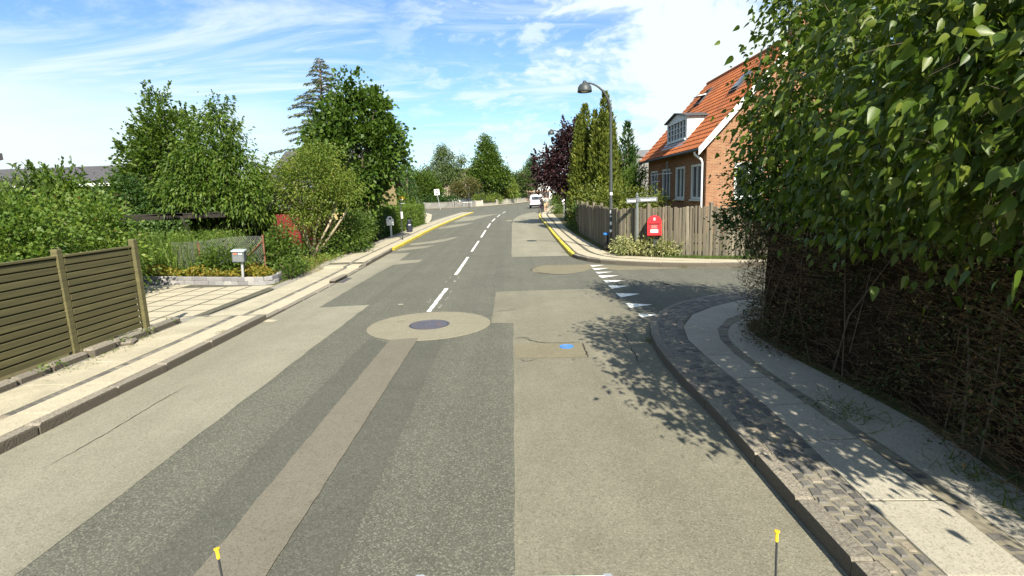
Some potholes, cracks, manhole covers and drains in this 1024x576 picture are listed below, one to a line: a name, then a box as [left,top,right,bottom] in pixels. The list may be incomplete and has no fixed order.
manhole cover [409,320,449,330]
crack [44,385,188,468]
